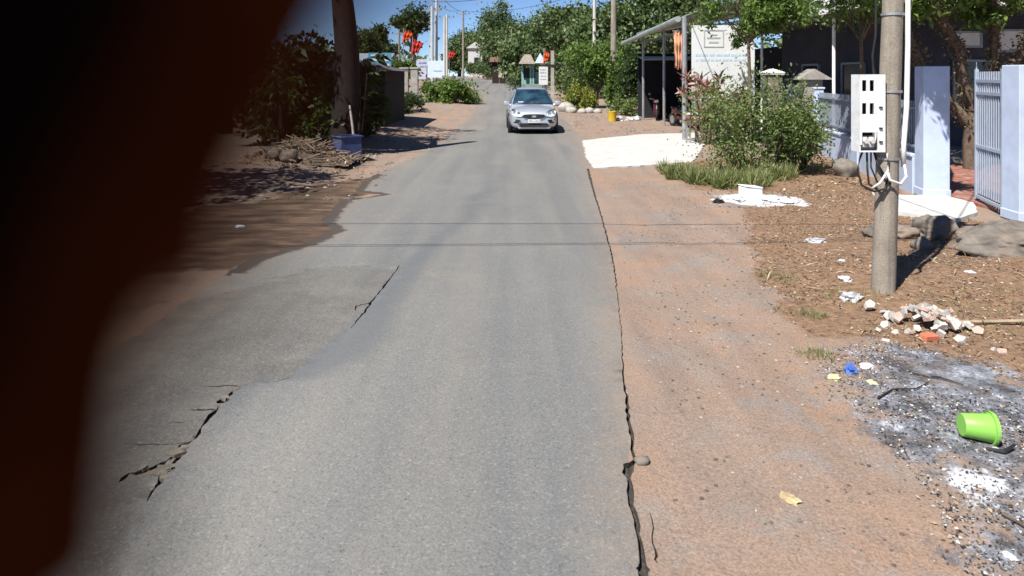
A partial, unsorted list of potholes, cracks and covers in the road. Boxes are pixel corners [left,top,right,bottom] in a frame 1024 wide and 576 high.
crack [157,378,287,487]
crack [587,169,658,576]
crack [355,265,400,323]
